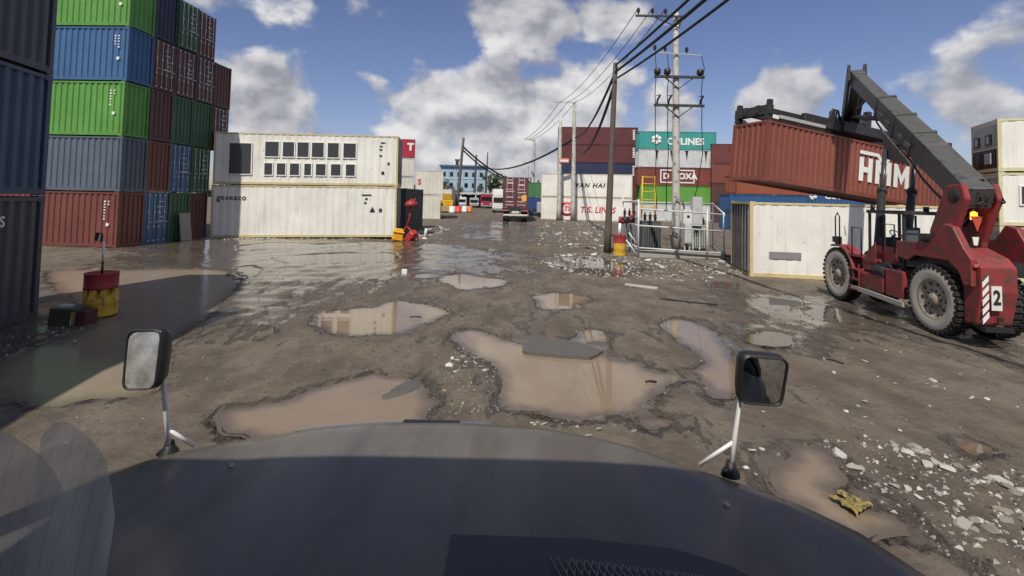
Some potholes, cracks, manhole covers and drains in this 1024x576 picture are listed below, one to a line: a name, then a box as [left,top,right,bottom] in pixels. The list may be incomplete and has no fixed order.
pothole [744,296,813,311]
pothole [758,442,930,544]
pothole [526,291,593,311]
pothole [204,369,446,443]
pothole [434,271,510,291]
pothole [735,327,807,350]
pothole [945,437,1004,457]
pothole [307,298,458,338]
pothole [789,303,845,323]
pothole [446,328,703,424]
pothole [655,316,741,404]
